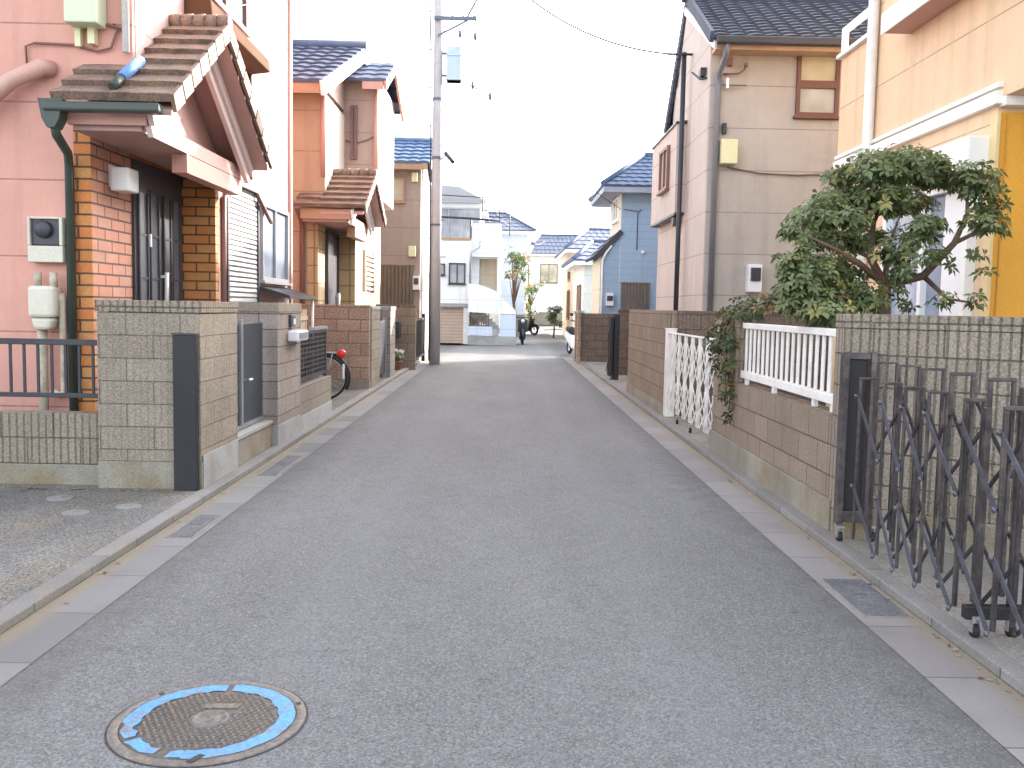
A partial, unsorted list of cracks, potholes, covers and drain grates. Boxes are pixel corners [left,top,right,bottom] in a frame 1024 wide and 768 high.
manhole cover [104,681,309,768]
